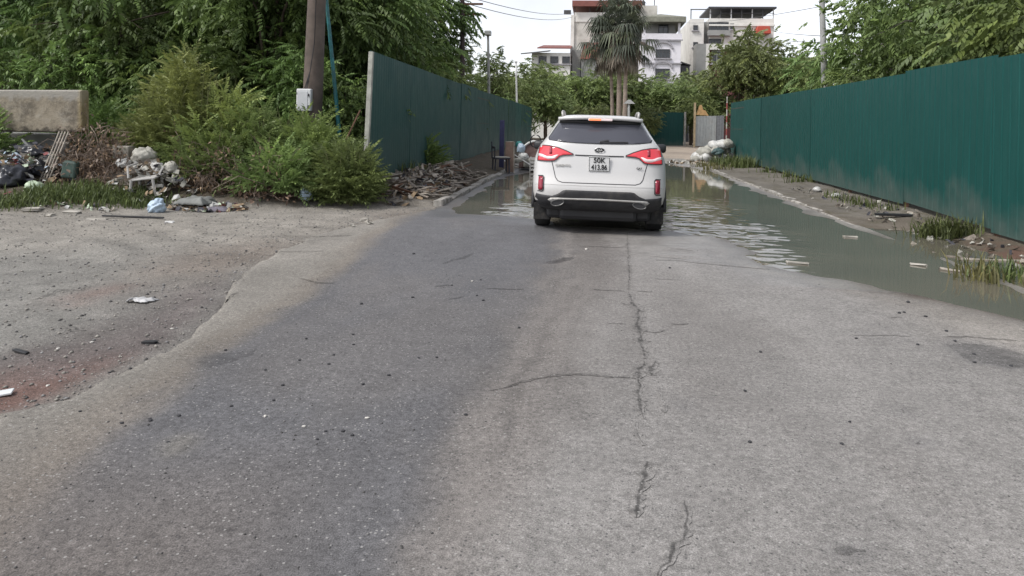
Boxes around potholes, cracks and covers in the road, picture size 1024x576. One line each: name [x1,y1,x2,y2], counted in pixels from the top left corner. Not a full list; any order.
crack [491,232,693,576]
